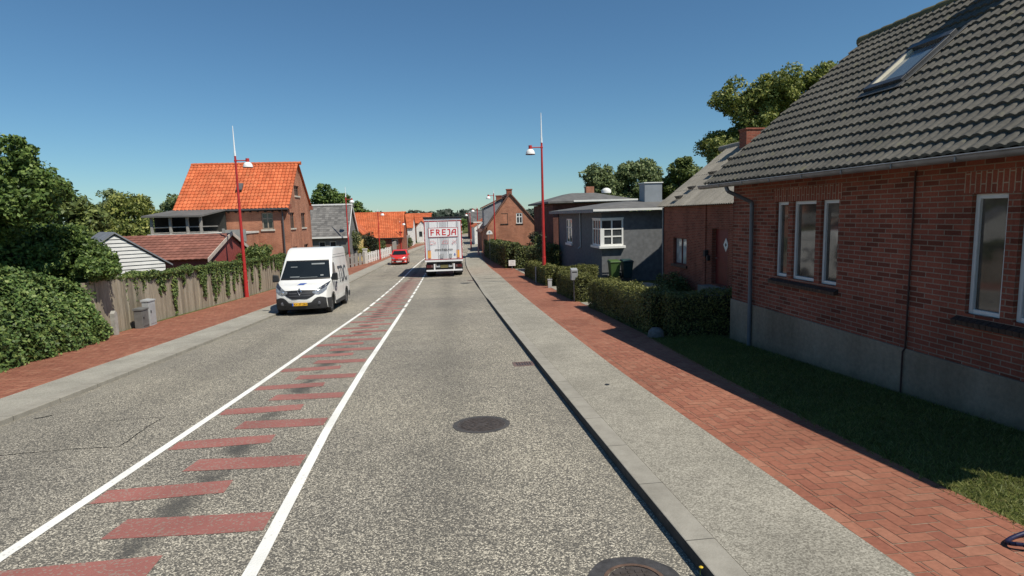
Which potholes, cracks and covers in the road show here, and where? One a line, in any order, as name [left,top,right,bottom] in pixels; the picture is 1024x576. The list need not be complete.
manhole cover [453,416,510,433]
manhole cover [588,557,680,576]
crack [8,417,163,455]
